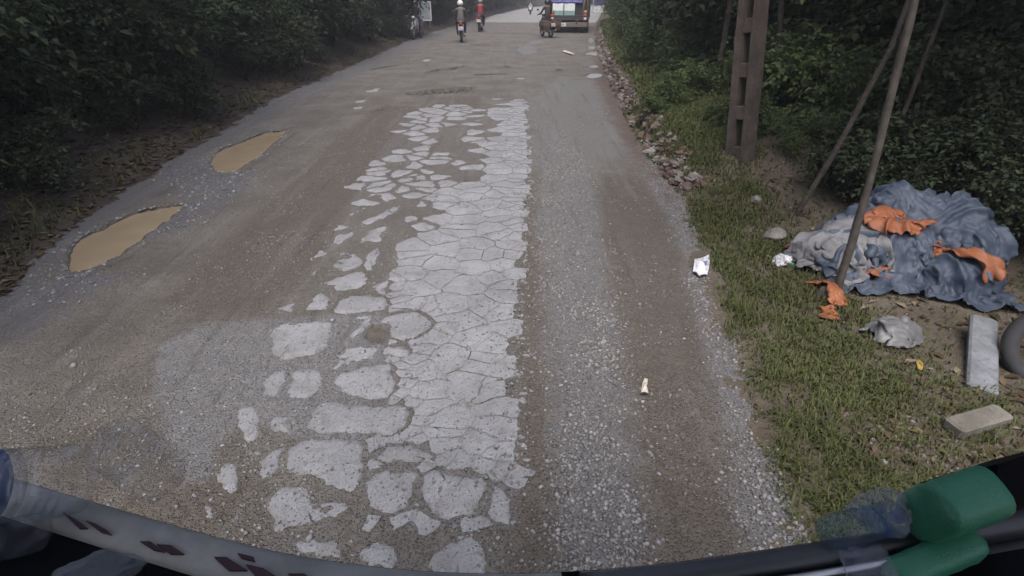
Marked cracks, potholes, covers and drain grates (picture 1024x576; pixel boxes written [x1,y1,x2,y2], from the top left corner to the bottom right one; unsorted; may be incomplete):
crack [398,221,523,419]
pothole [199,128,297,176]
crack [432,103,529,216]
pothole [51,201,195,279]
pothole [399,85,483,97]
